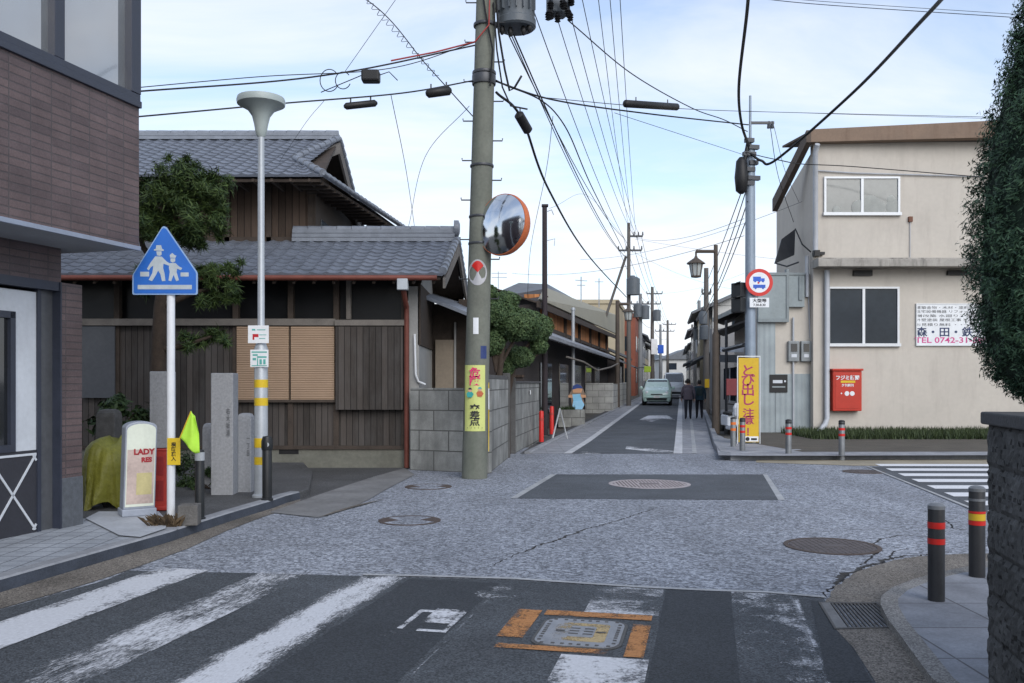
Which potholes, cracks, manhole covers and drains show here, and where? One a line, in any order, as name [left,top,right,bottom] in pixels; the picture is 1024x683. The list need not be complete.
crack [476,507,656,570]
manhole cover [609,479,691,489]
manhole cover [378,515,441,526]
manhole cover [783,537,882,555]
manhole cover [531,618,628,650]
crack [822,520,962,597]
drain grate [818,602,889,630]
